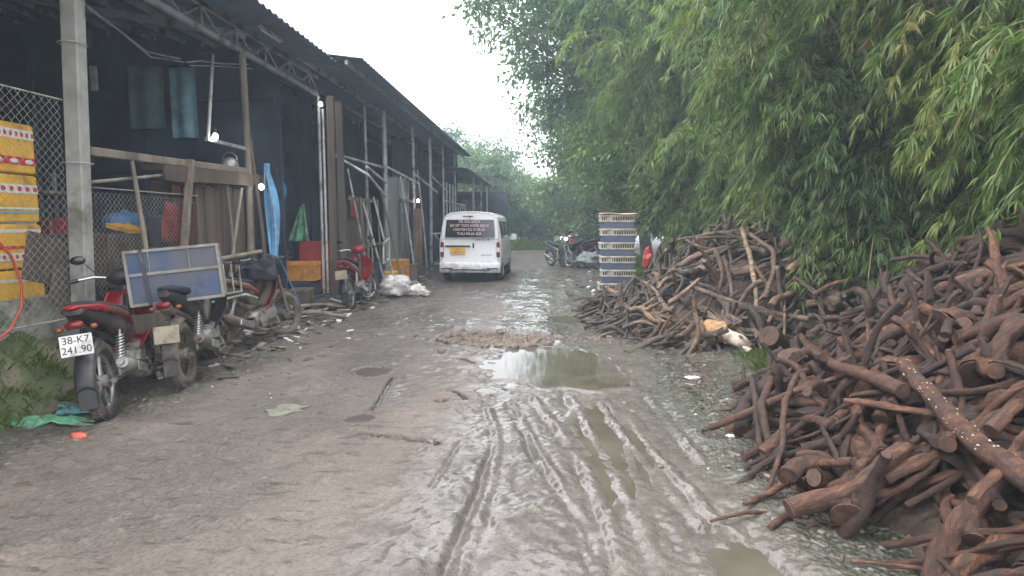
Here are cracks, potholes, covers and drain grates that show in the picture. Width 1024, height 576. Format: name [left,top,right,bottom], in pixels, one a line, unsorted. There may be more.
pothole [332,410,383,425]
crack [368,377,396,411]
pothole [570,346,631,383]
crack [343,432,438,445]
pothole [346,365,398,379]
